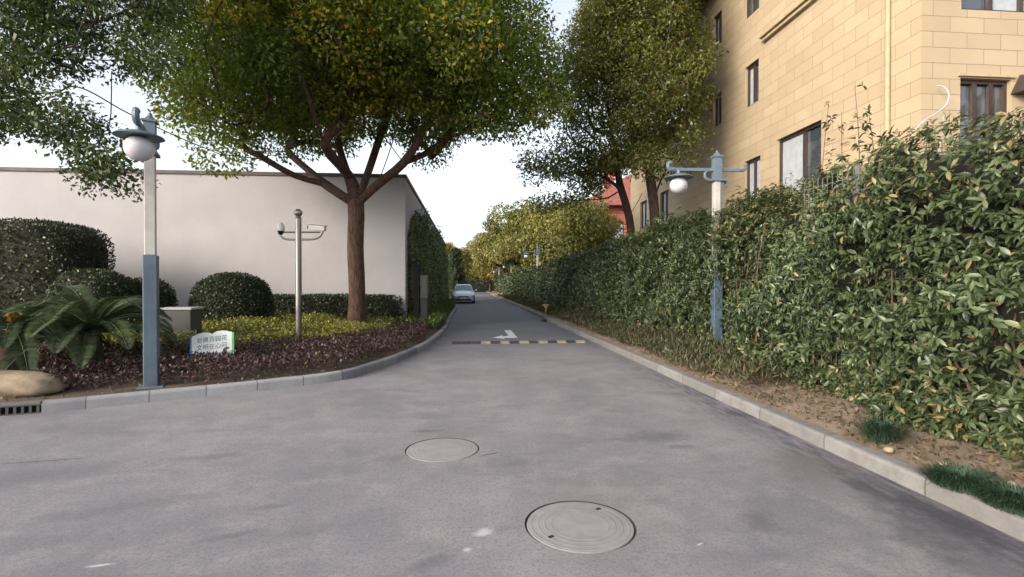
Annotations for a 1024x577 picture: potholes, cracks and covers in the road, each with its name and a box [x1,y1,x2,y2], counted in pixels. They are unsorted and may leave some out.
manhole cover [525,501,637,554]
drain grate [0,400,44,416]
manhole cover [405,438,479,462]
